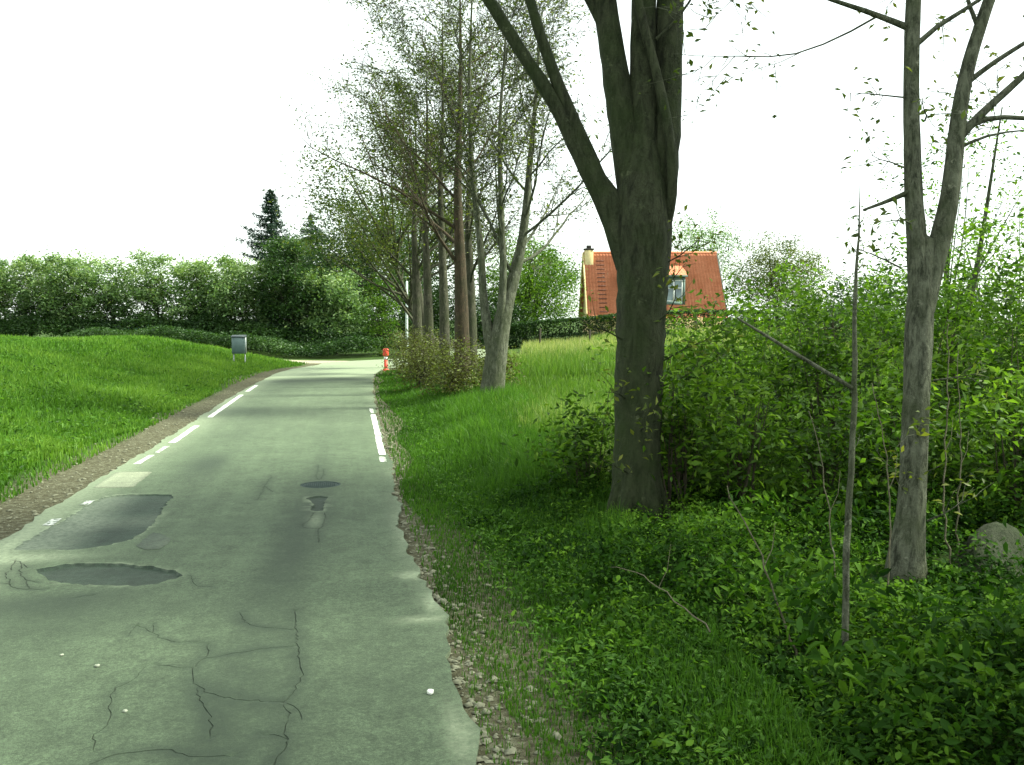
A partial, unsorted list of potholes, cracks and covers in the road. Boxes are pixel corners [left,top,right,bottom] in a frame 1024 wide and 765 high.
pothole [36,563,183,586]
crack [0,560,42,590]
crack [89,612,304,765]
pothole [306,496,328,511]
